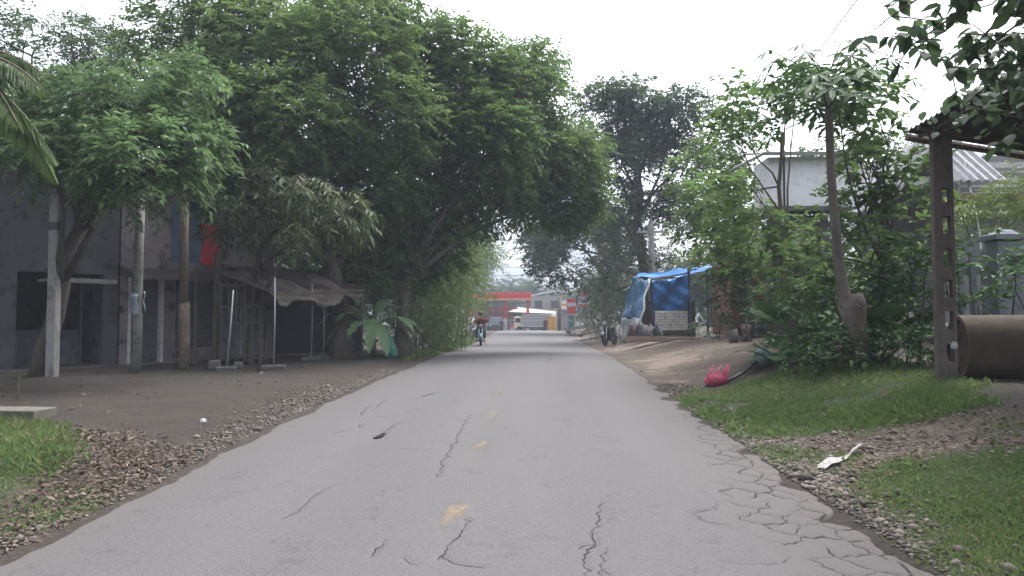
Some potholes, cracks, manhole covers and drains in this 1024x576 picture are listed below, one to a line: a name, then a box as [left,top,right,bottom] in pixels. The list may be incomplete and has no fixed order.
crack [436,418,485,569]
crack [579,503,609,576]
crack [682,414,913,576]
